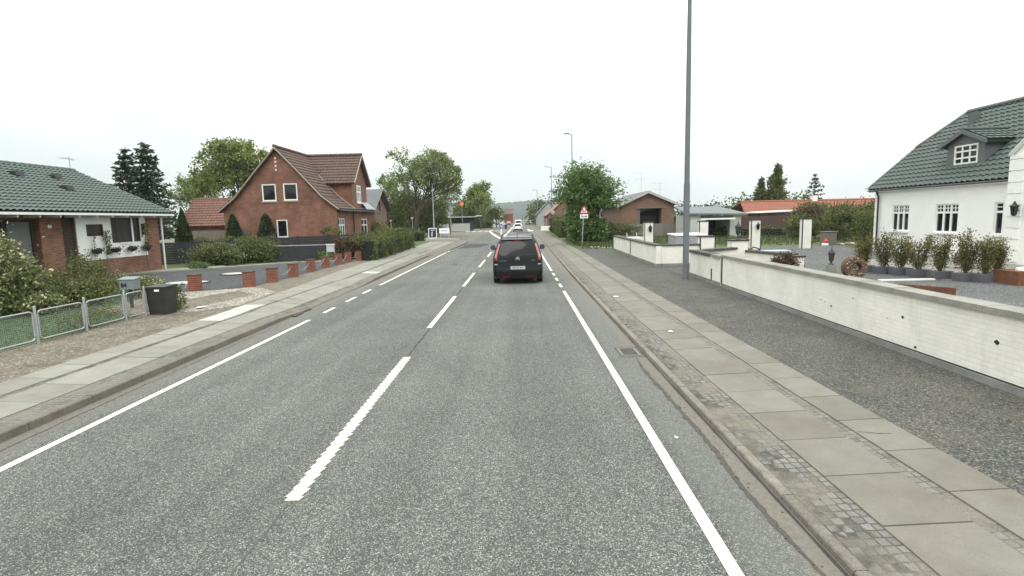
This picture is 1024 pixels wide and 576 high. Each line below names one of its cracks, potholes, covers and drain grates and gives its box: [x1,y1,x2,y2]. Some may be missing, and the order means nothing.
drain grate [617,348,641,356]
